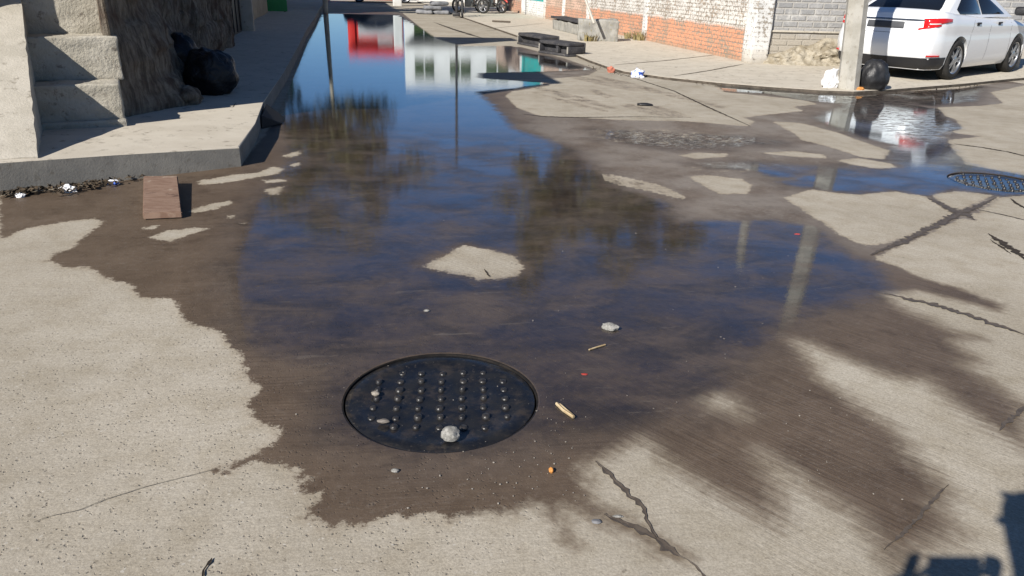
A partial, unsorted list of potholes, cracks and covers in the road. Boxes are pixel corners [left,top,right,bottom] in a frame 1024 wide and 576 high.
crack [595,461,705,576]
manhole cover [342,354,538,453]
crack [870,197,1024,259]
